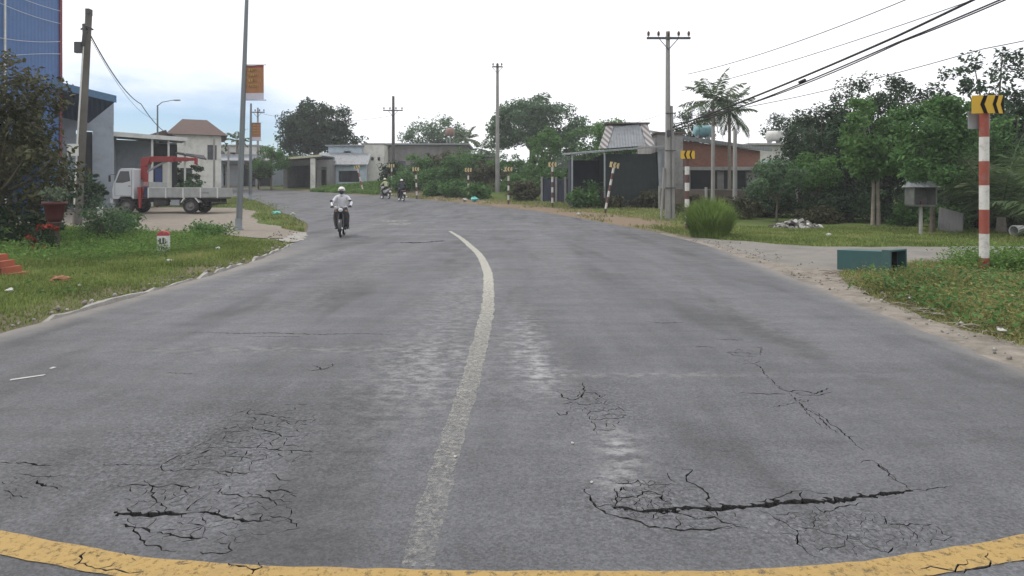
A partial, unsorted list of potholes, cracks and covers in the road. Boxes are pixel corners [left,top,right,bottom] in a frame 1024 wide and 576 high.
crack [727,348,863,450]
crack [584,460,952,563]
crack [0,462,62,499]
crack [922,554,992,573]
crack [557,383,626,434]
crack [78,404,318,574]
